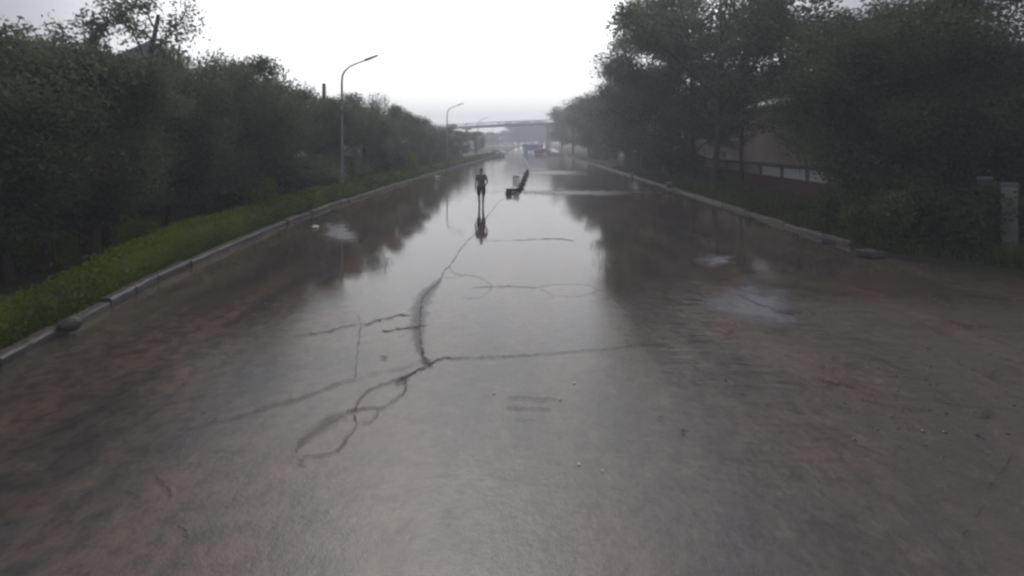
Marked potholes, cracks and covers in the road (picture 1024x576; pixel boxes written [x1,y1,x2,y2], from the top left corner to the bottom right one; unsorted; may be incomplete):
crack [293,198,739,423]
